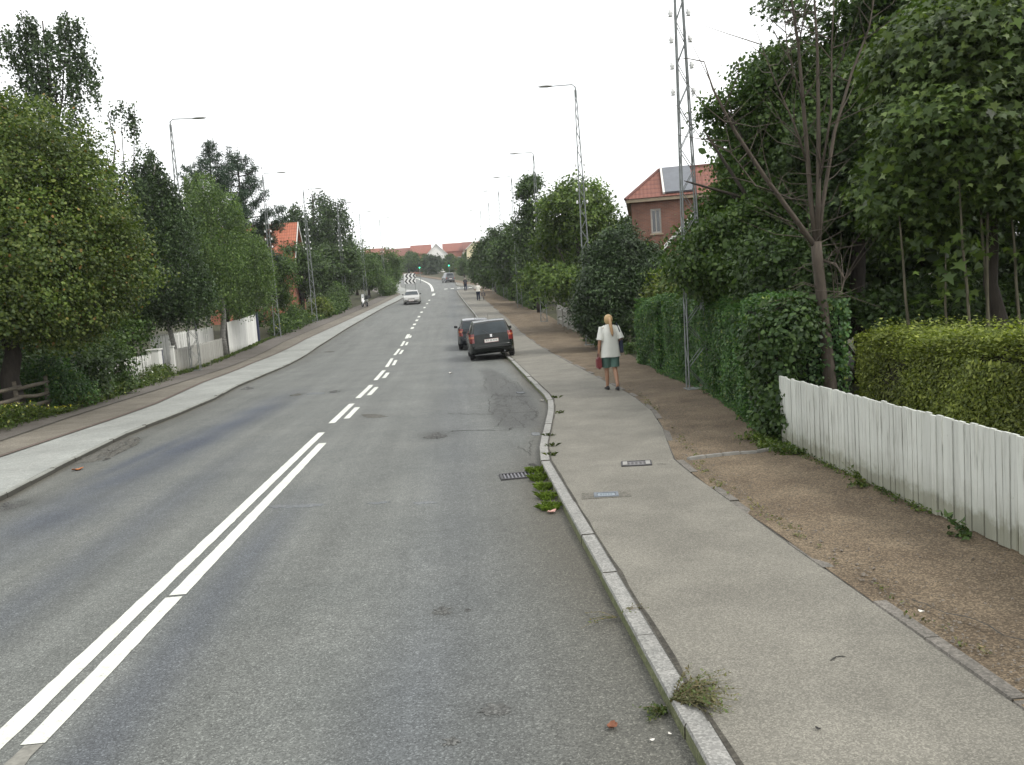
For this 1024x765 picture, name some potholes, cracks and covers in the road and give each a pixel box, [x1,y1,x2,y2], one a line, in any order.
manhole cover [582,490,631,499]
crack [448,375,539,456]
drain grate [499,471,534,481]
